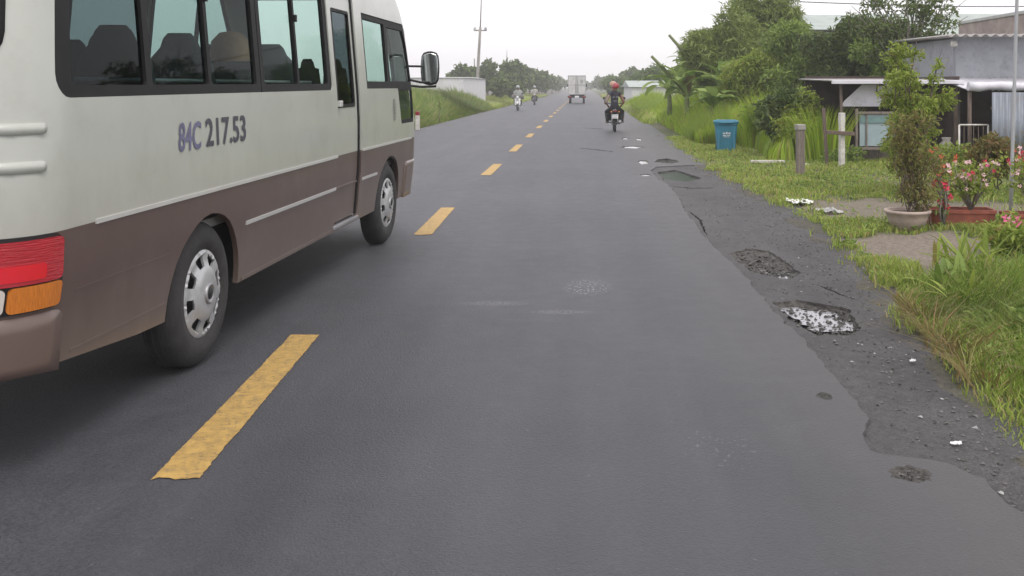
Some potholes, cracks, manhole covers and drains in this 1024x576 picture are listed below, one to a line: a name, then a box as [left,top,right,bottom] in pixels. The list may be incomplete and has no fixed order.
pothole [772,300,861,336]
pothole [888,465,932,483]
pothole [657,170,702,182]
pothole [728,249,801,279]
